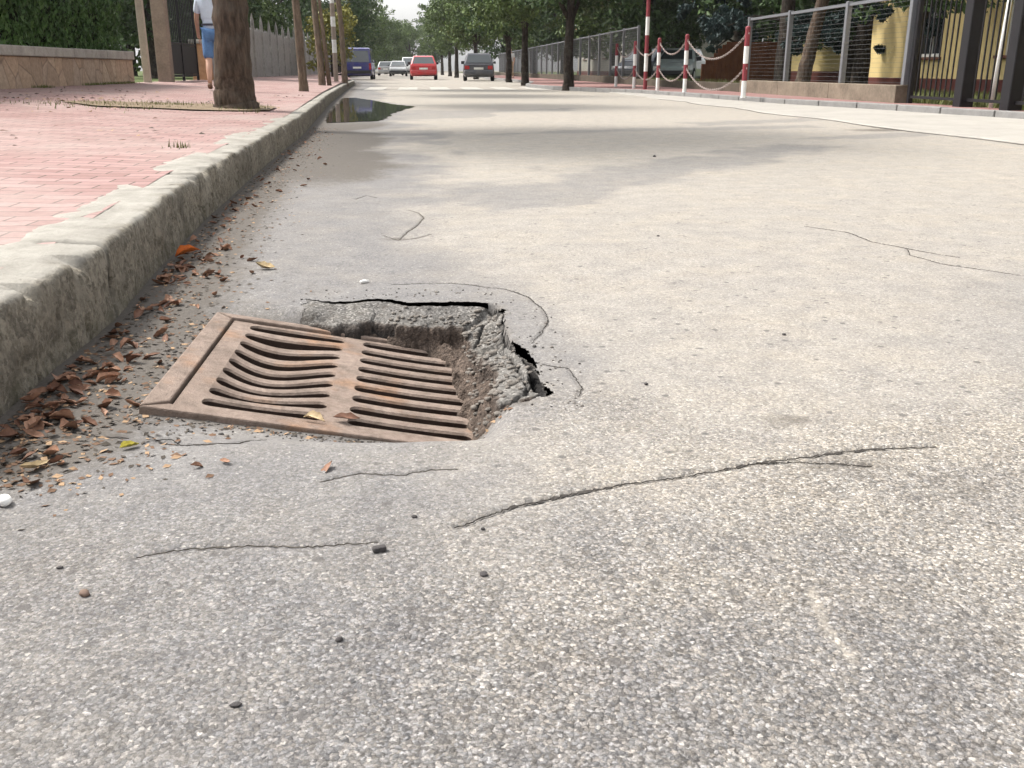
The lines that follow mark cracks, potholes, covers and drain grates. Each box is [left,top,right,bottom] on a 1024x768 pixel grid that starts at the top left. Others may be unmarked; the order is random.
pothole [300,299,547,440]
crack [386,210,432,241]
crack [806,226,1020,276]
crack [320,446,936,528]
drain grate [139,312,473,443]
crack [136,542,378,558]
